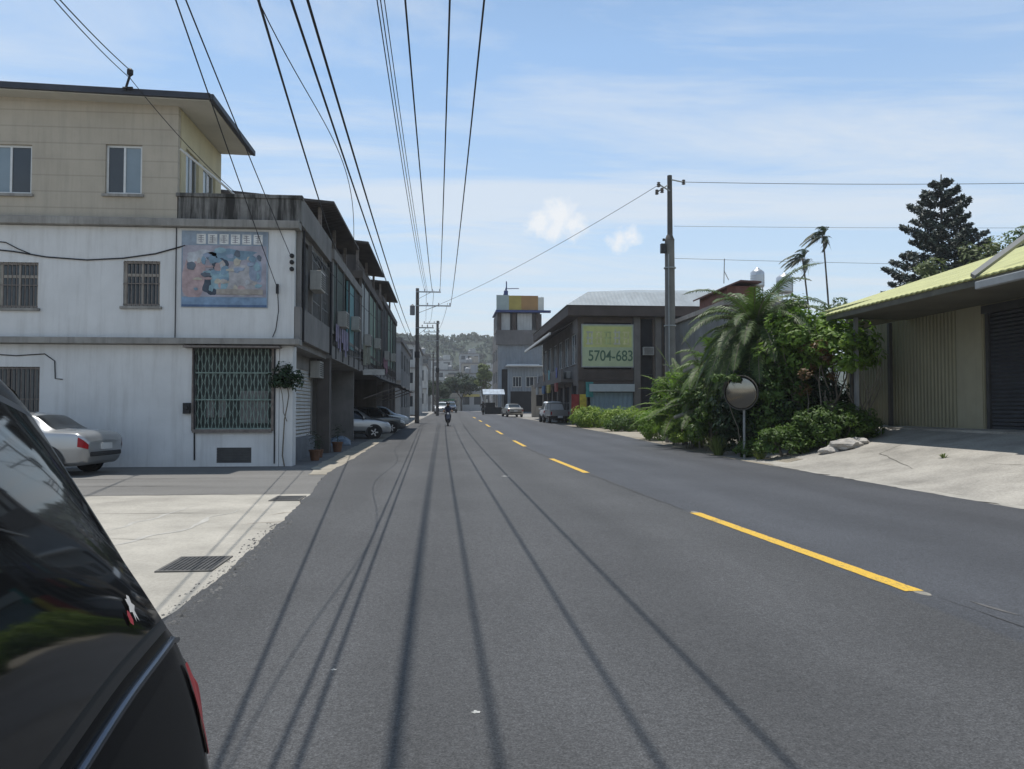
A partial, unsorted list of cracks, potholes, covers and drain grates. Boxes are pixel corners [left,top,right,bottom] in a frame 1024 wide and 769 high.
drain grate [154,556,233,573]
